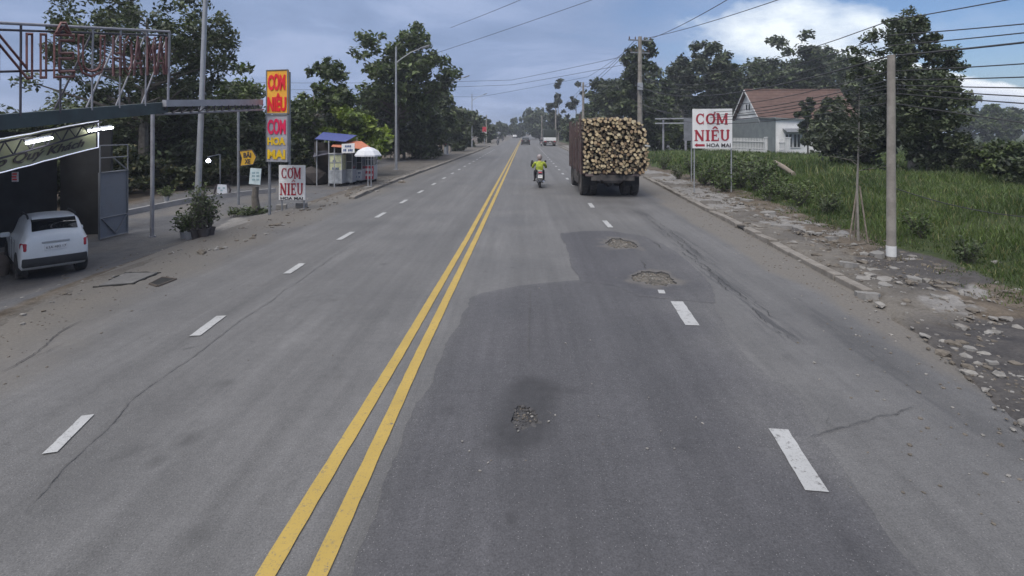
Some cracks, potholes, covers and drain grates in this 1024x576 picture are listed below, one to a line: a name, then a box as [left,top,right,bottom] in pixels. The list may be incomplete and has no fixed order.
pothole [511,405,542,430]
pothole [605,238,639,248]
drain grate [148,276,177,287]
pothole [631,271,677,286]
crack [3,321,80,371]
crack [640,213,789,338]
crack [810,405,919,437]
